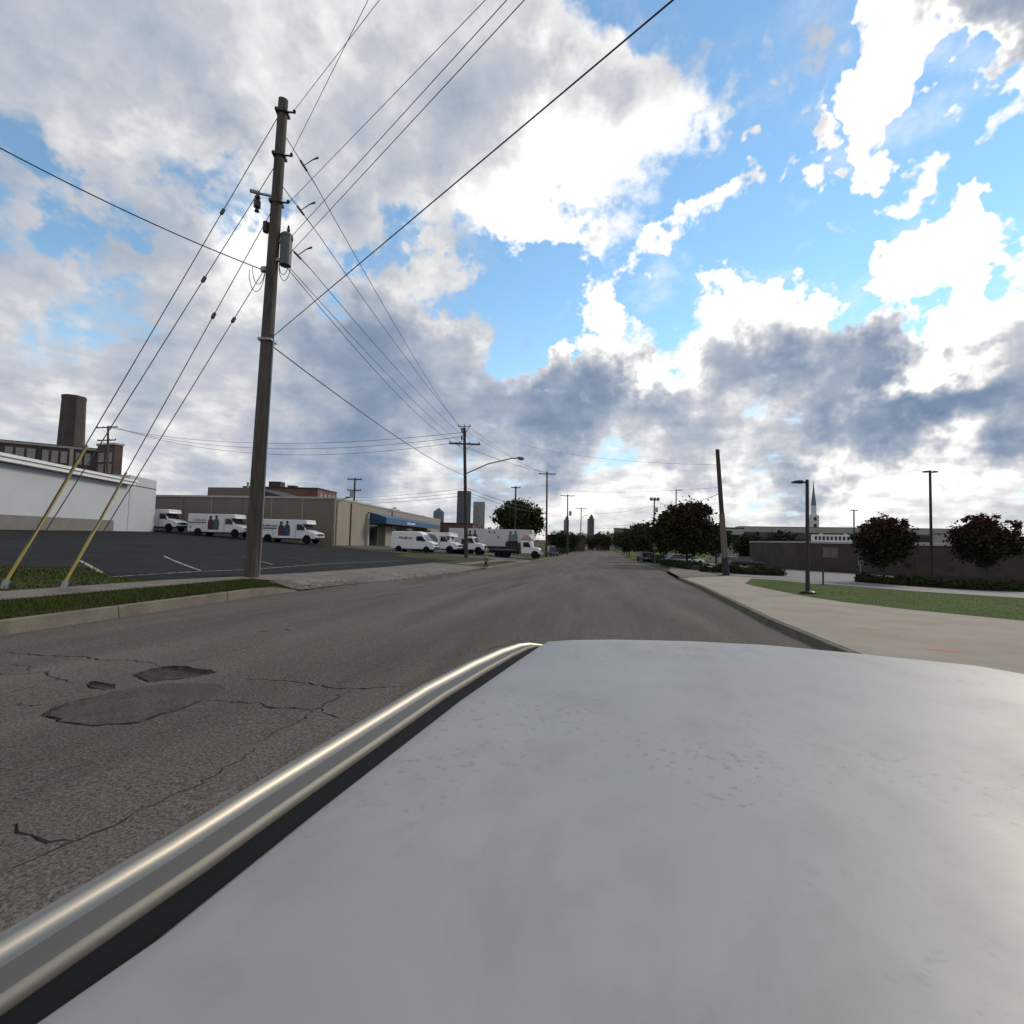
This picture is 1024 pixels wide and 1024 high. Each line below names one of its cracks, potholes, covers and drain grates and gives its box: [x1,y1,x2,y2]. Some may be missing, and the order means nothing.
pothole [132,665,216,682]
crack [2,678,408,872]
pothole [85,681,116,690]
crack [0,652,160,706]
